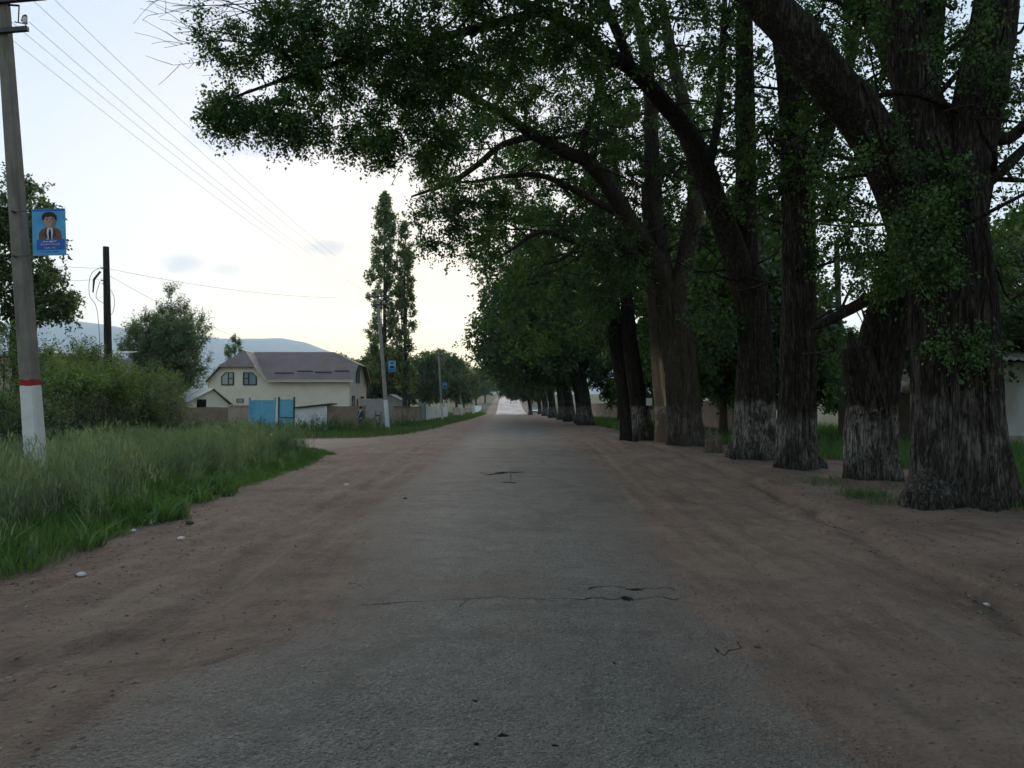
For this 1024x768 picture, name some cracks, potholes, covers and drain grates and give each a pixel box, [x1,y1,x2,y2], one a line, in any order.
crack [371,586,681,607]
crack [484,472,520,483]
